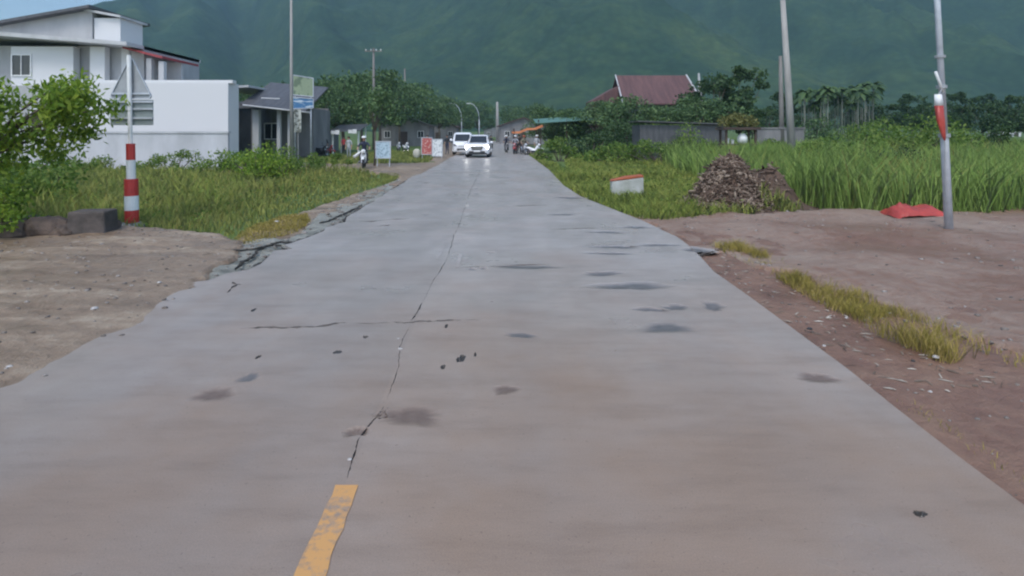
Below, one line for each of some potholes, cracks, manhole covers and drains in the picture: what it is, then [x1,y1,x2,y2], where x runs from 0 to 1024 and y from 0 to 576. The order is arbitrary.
crack [226,181,410,293]
crack [254,319,453,329]
